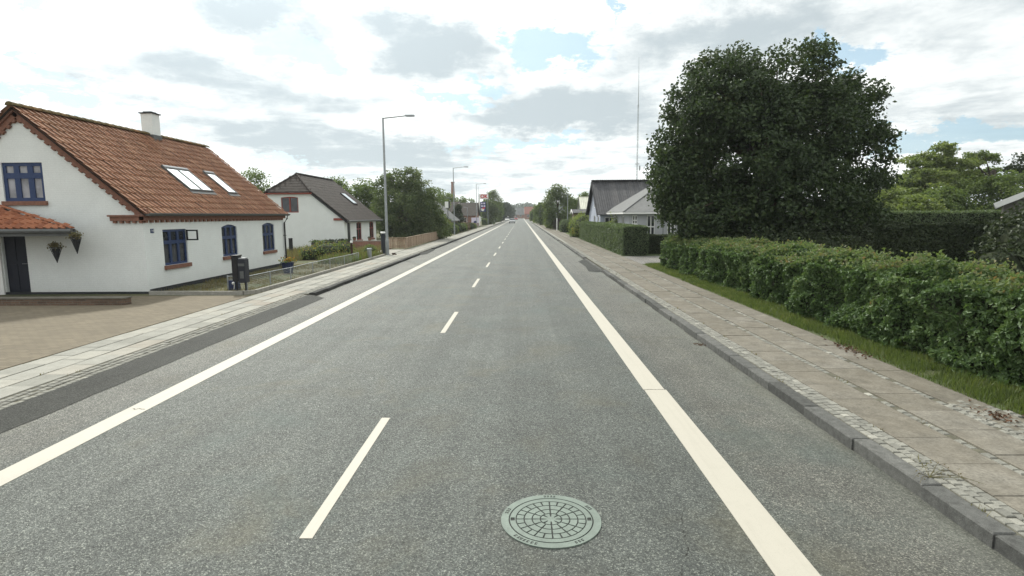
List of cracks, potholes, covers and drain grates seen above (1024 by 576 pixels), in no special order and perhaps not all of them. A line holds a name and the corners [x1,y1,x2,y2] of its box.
manhole cover [501,495,601,549]
